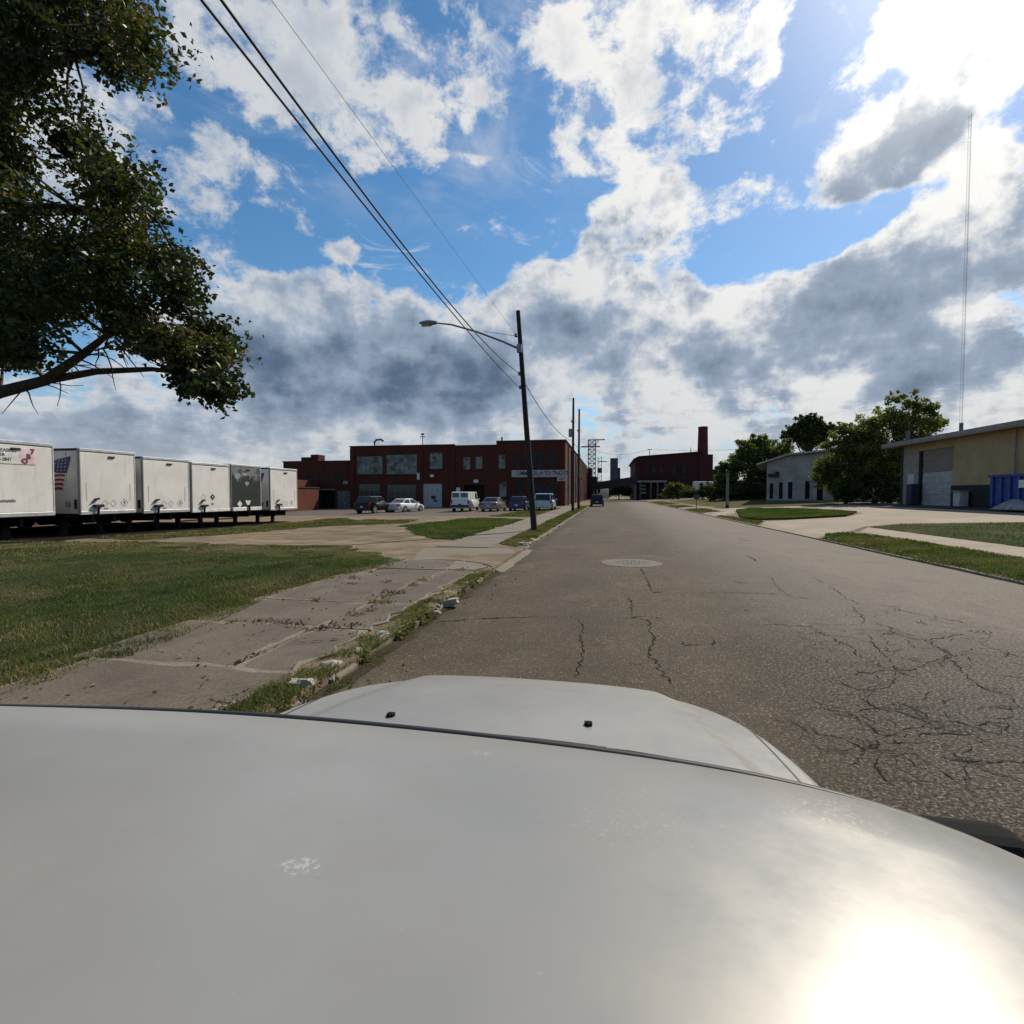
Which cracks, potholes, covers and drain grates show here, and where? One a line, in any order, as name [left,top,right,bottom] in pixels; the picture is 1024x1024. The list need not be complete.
manhole cover [601,559,663,567]
crack [437,615,585,677]
crack [628,569,671,684]
crack [692,577,1024,799]
